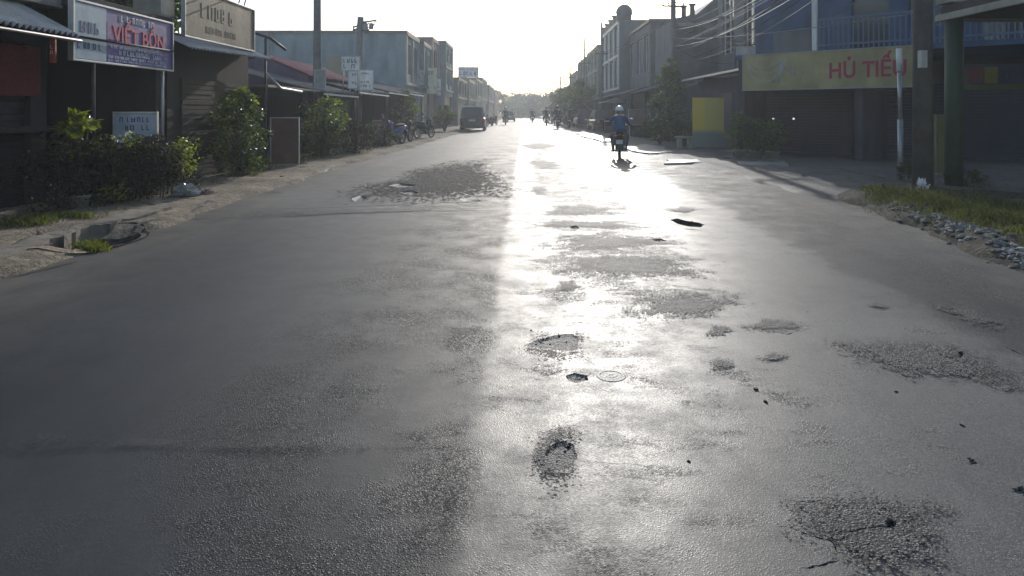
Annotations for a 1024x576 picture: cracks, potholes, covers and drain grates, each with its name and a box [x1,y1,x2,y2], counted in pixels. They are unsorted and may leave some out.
pothole [671,218,704,227]
pothole [566,373,588,383]
crack [787,523,845,569]
pothole [524,334,579,351]
manhole cover [596,370,626,382]
pothole [545,440,578,469]
